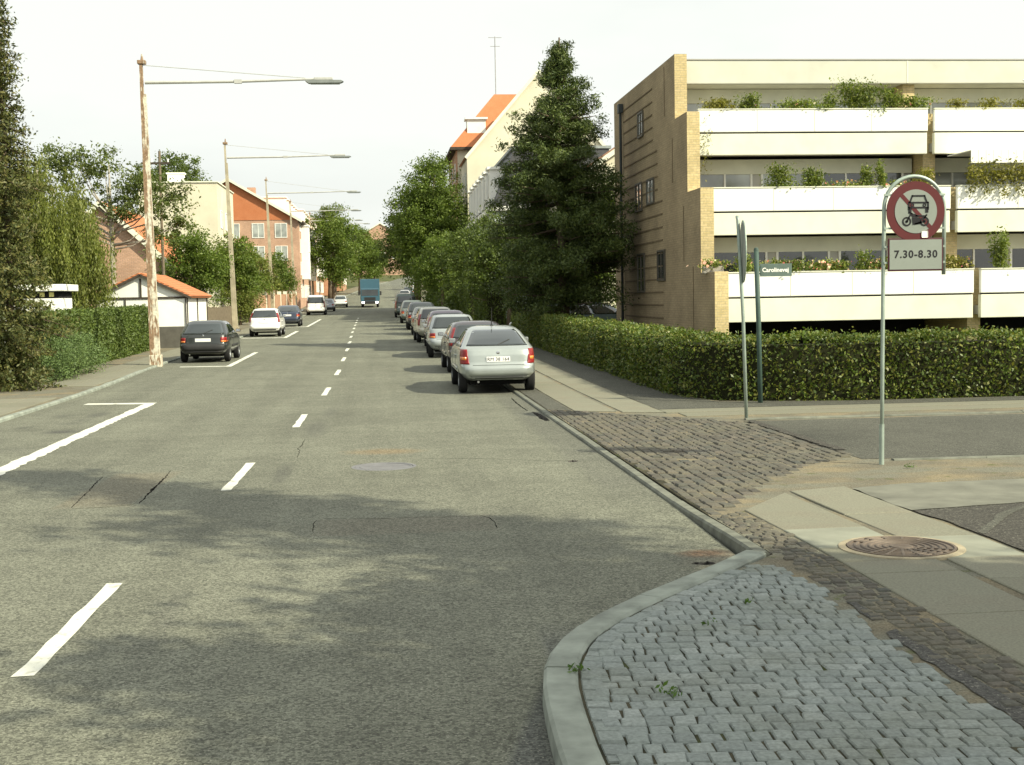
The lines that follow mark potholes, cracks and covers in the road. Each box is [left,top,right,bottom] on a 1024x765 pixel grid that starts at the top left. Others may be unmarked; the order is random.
manhole cover [838,536,966,561]
manhole cover [351,462,416,471]
crack [71,471,170,509]
